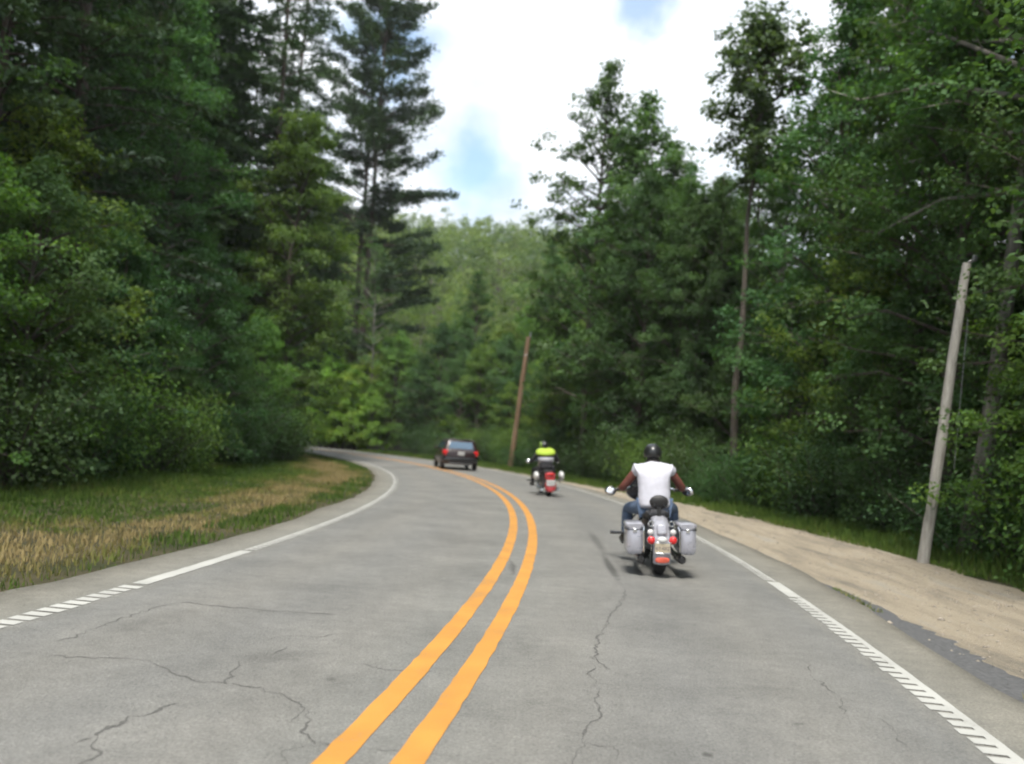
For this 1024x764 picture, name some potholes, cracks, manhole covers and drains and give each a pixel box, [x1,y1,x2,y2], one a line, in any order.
crack [572,584,627,764]
crack [4,652,331,764]
crack [55,602,326,641]
